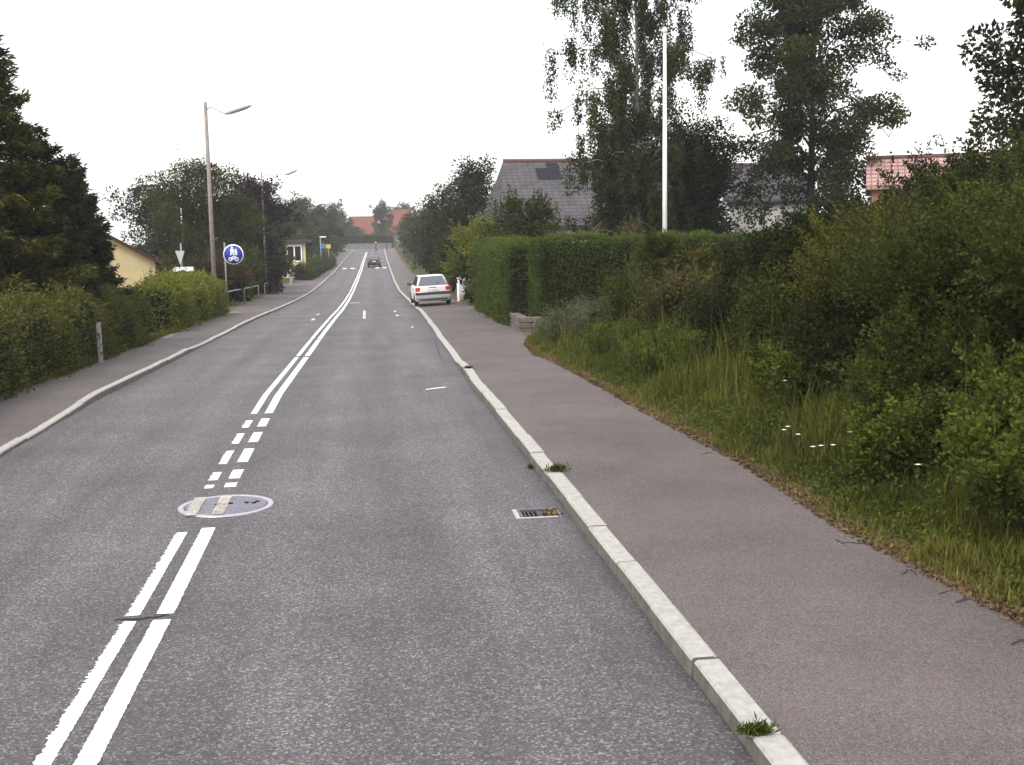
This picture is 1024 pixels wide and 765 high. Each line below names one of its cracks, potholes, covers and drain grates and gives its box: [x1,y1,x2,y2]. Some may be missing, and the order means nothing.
drain grate [512,507,564,519]
manhole cover [177,494,274,517]
